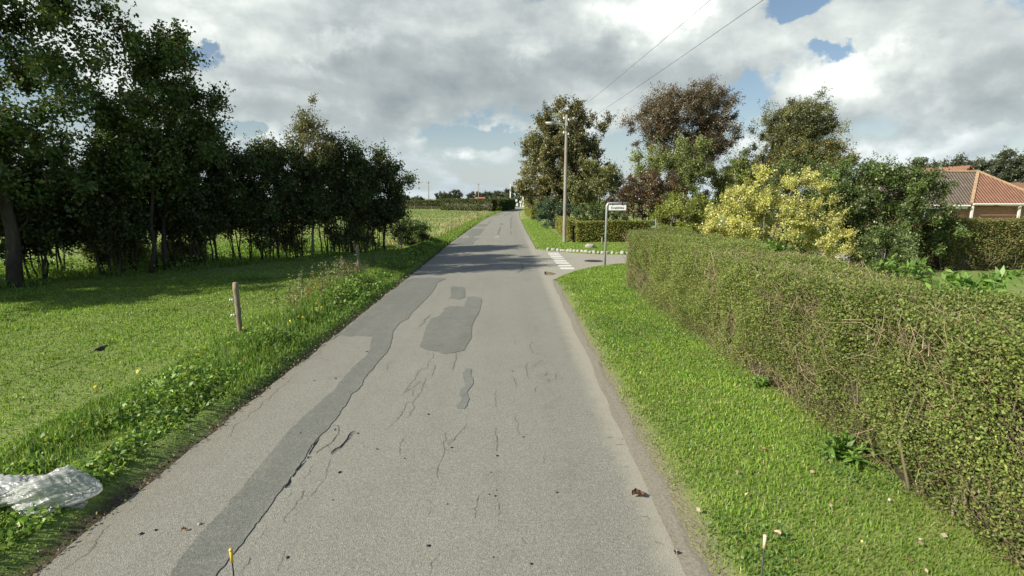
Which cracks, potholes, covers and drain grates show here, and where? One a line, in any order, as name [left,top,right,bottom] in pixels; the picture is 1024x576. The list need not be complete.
crack [388,354,456,453]
